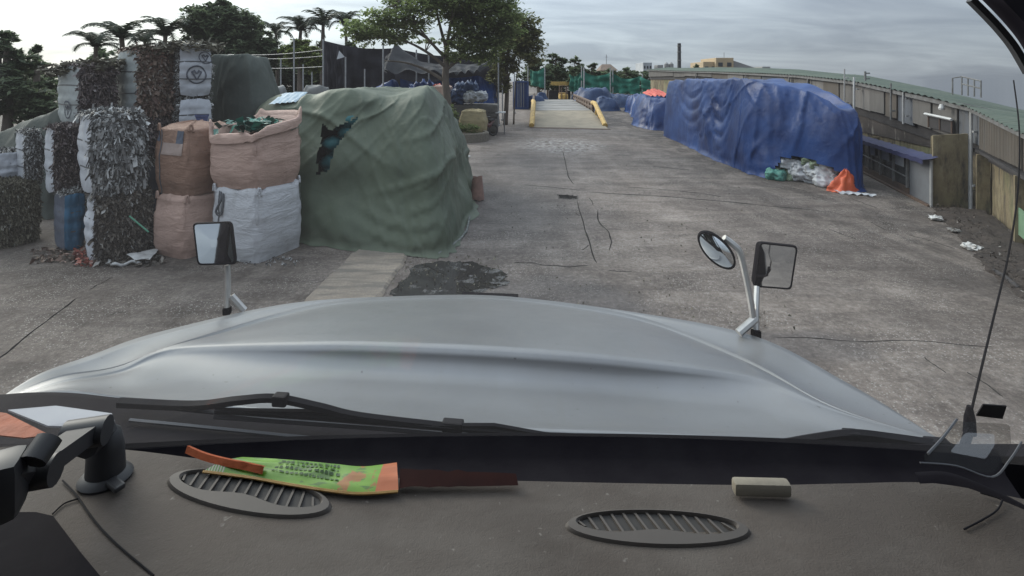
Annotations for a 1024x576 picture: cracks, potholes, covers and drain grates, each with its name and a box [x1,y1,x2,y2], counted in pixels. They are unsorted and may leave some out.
crack [514,151,886,272]
crack [774,337,992,373]
